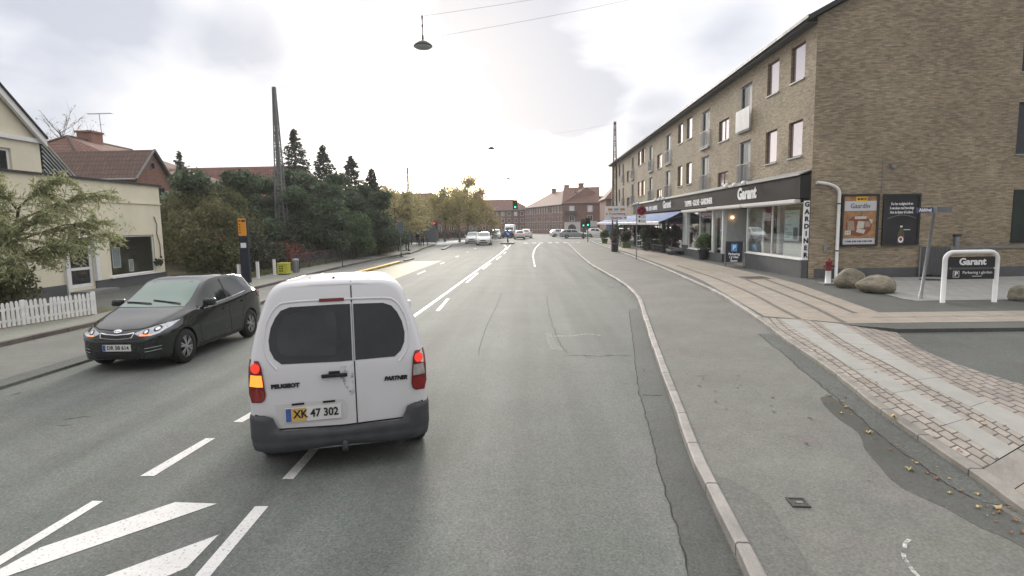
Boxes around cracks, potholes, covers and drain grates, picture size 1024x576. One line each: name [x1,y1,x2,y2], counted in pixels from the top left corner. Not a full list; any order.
crack [588,310,689,576]
manhole cover [785,497,811,508]
